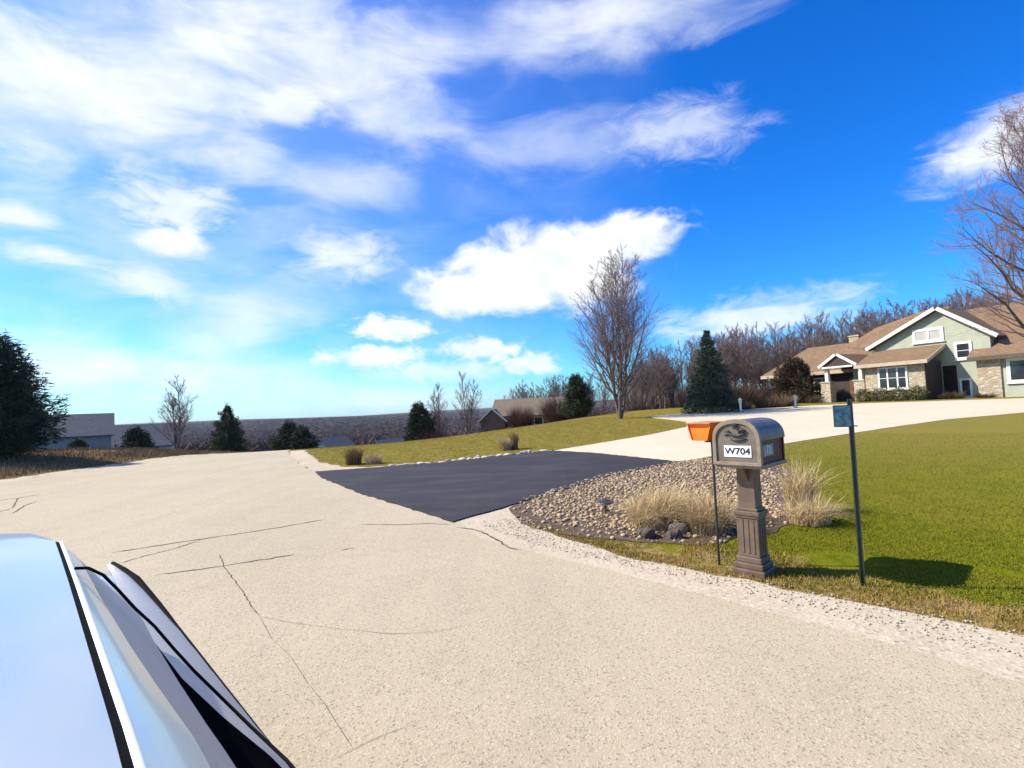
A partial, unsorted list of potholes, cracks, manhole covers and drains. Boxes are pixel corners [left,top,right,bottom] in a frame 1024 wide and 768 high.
crack [458,527,515,549]
crack [162,554,451,760]
crack [118,519,324,564]
